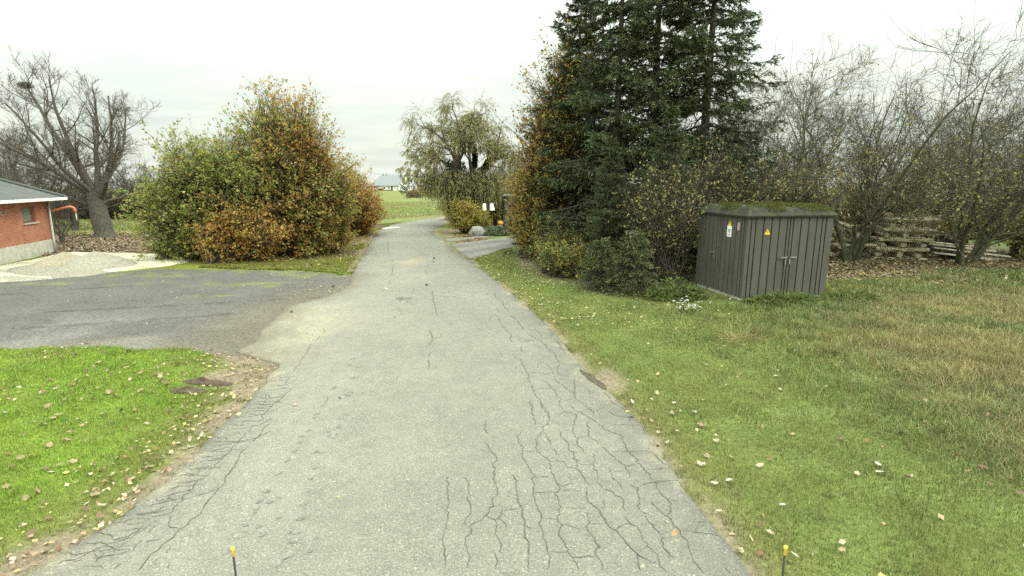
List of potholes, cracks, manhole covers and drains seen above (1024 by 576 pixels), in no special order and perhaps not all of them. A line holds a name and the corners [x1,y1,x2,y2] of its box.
crack [442,292,719,572]
crack [59,332,325,569]
